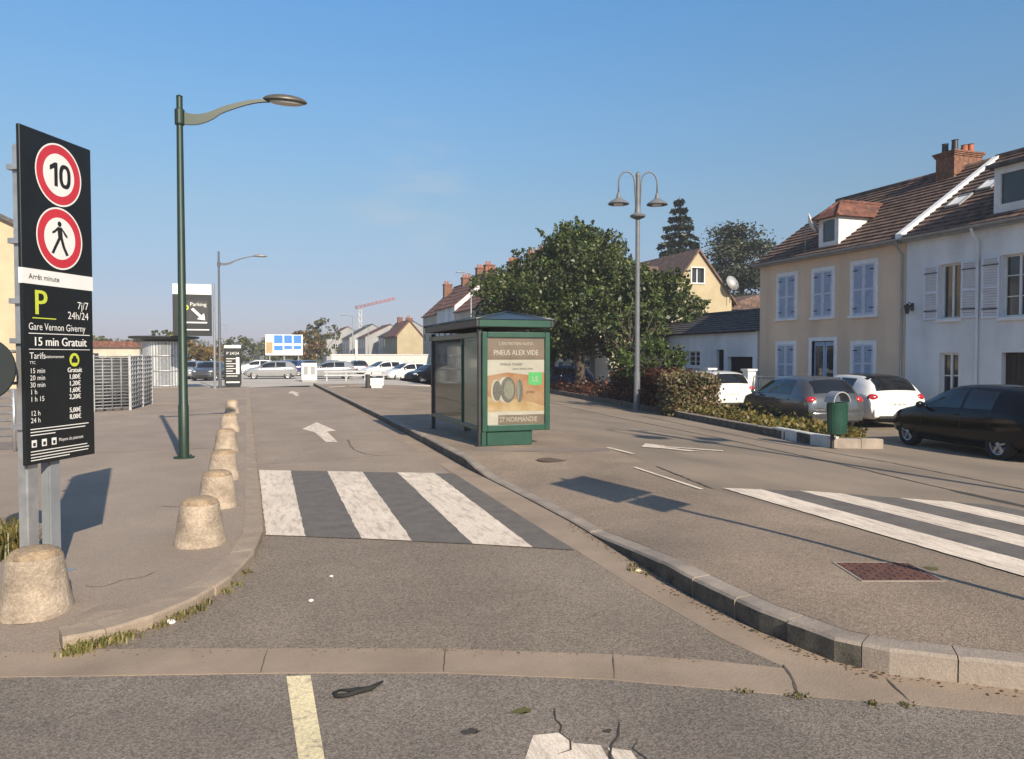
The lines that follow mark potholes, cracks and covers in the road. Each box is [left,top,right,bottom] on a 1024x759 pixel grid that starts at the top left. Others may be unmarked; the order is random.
crack [554,707,572,754]
crack [609,721,647,759]
crack [783,665,798,694]
manhole cover [832,562,946,582]
